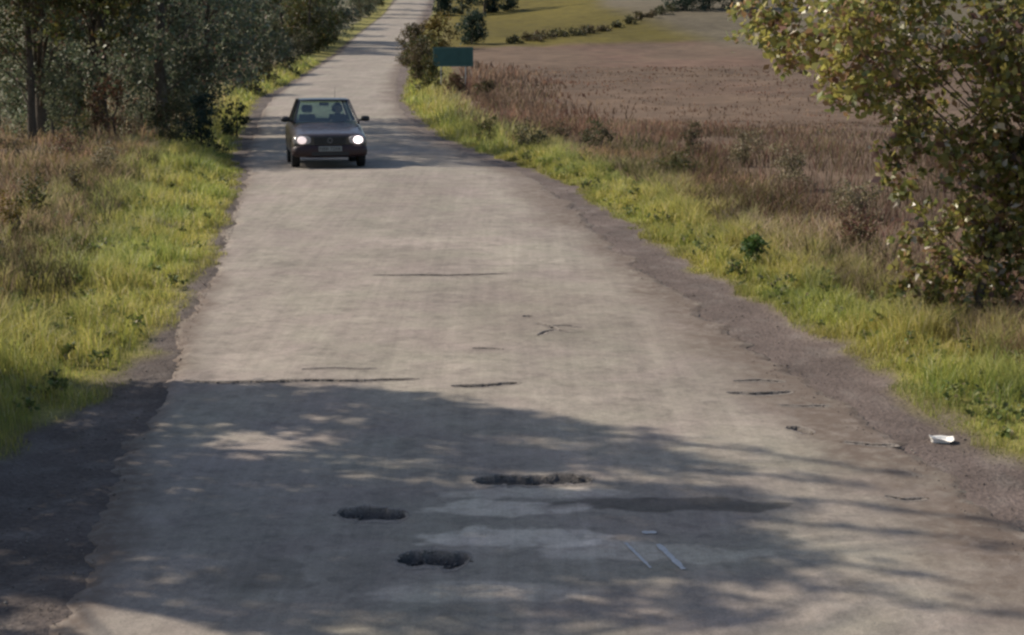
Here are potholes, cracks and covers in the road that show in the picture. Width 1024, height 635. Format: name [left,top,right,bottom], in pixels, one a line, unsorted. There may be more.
crack [184,367,420,384]
pothole [471,471,594,488]
pothole [393,546,473,573]
crack [535,323,582,335]
crack [726,378,832,407]
pothole [337,504,409,524]
